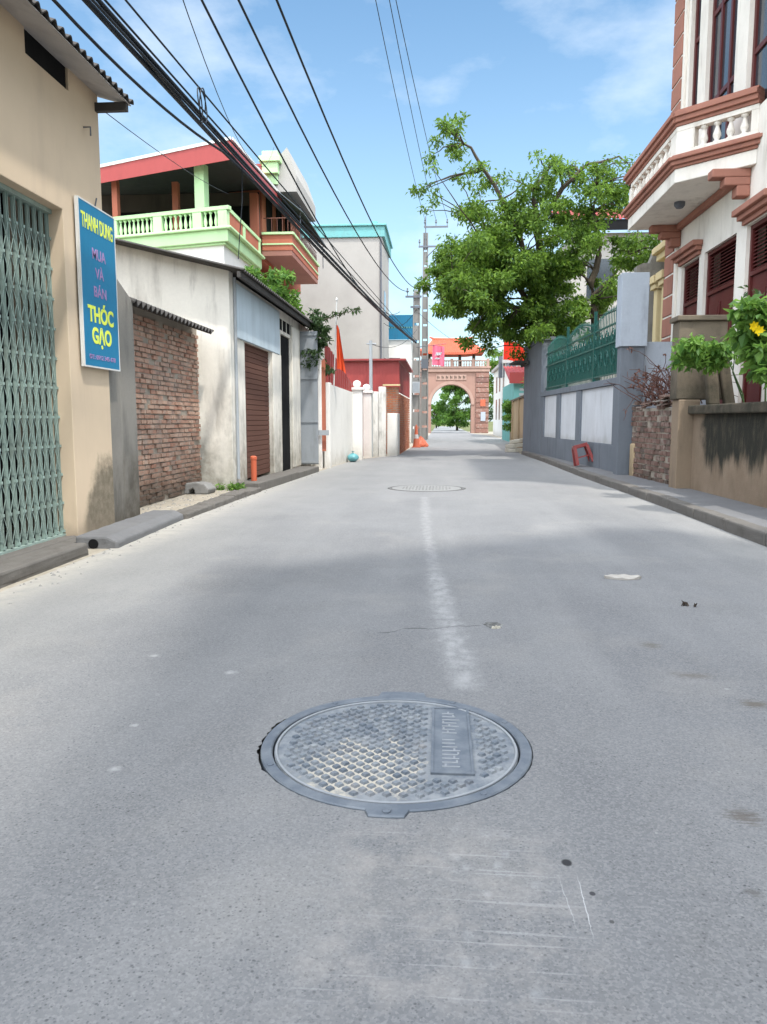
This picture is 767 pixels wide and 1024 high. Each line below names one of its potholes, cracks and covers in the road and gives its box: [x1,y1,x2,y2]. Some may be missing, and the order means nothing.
manhole cover [257,692,533,819]
